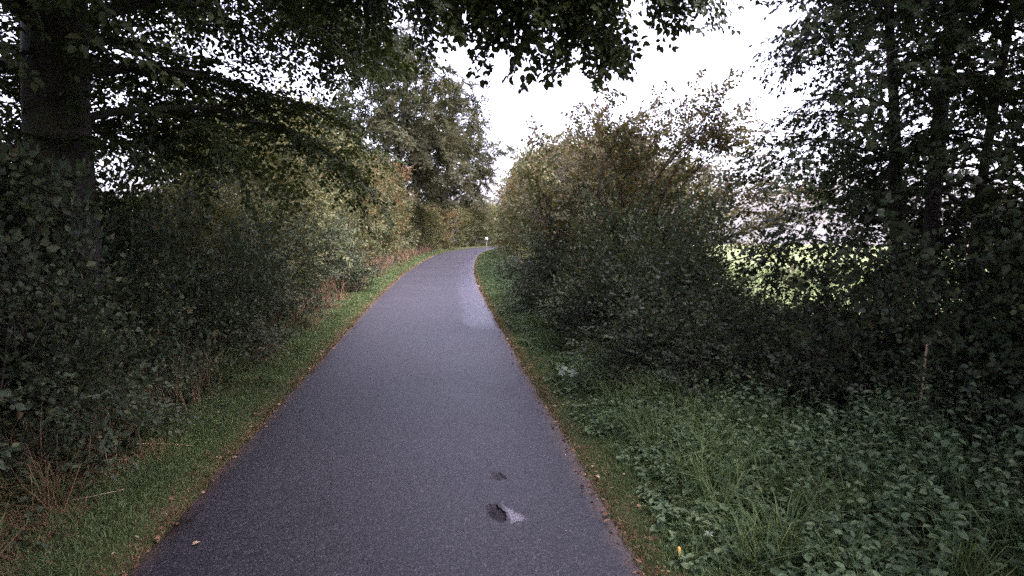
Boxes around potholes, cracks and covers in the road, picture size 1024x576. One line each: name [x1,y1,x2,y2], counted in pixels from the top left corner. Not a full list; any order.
pothole [484,504,507,523]
pothole [489,472,507,481]
